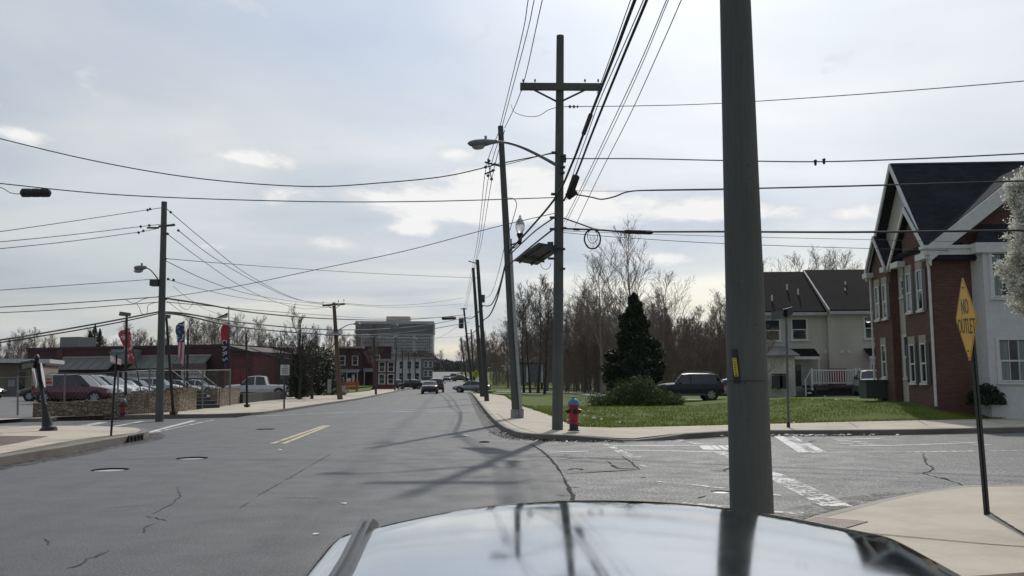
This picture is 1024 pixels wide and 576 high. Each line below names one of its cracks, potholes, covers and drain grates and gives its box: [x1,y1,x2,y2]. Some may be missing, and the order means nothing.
crack [110,487,181,533]
crack [920,453,963,486]
crack [530,443,643,500]
drain grate [127,433,144,443]
